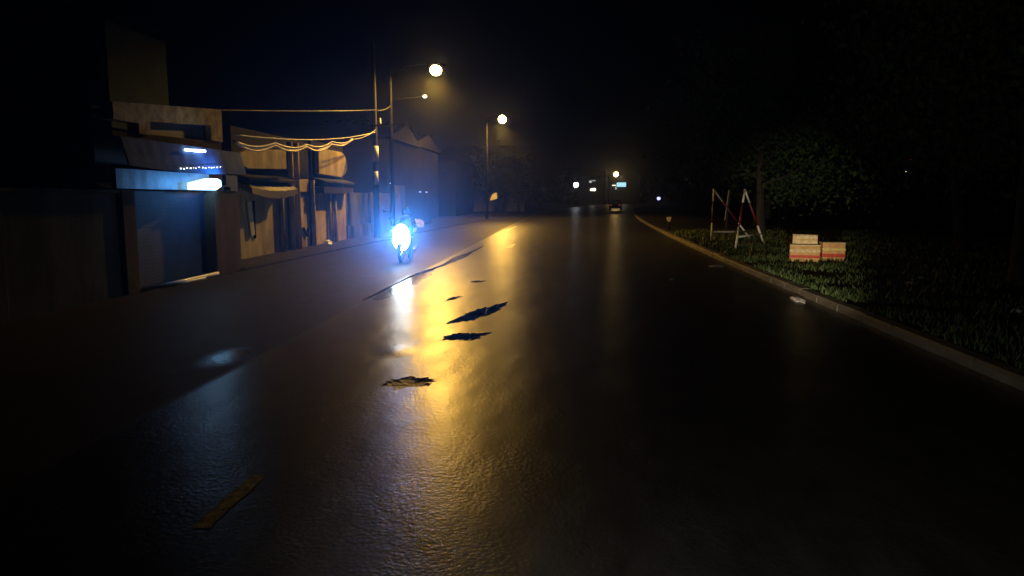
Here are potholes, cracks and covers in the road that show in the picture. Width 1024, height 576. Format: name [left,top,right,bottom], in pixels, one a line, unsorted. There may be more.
pothole [442,332,492,341]
pothole [446,302,508,324]
pothole [379,376,435,389]
crack [363,246,483,300]
